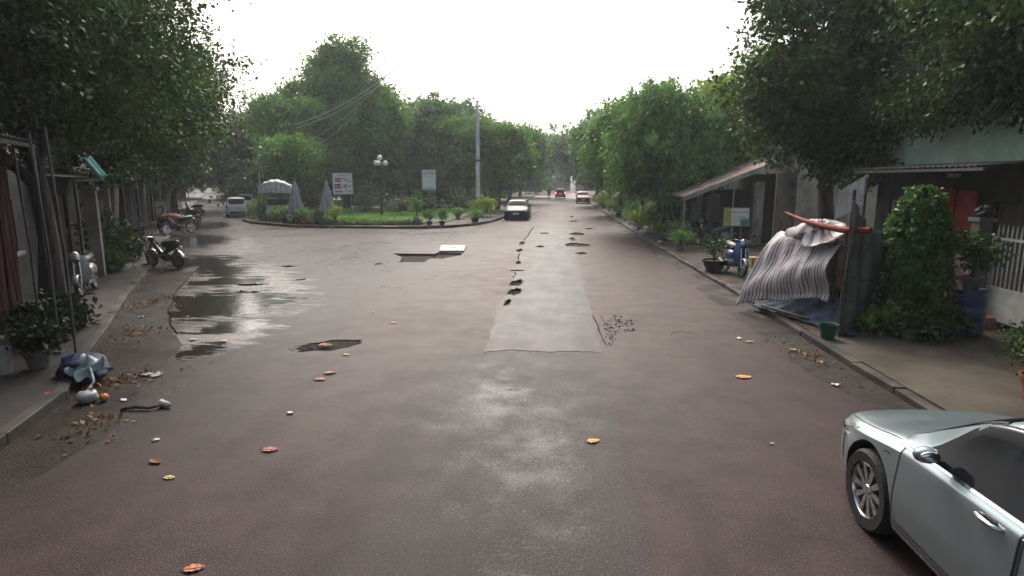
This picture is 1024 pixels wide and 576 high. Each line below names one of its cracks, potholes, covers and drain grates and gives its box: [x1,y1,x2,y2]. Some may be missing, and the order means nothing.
crack [483,314,652,353]
pothole [288,339,364,352]
